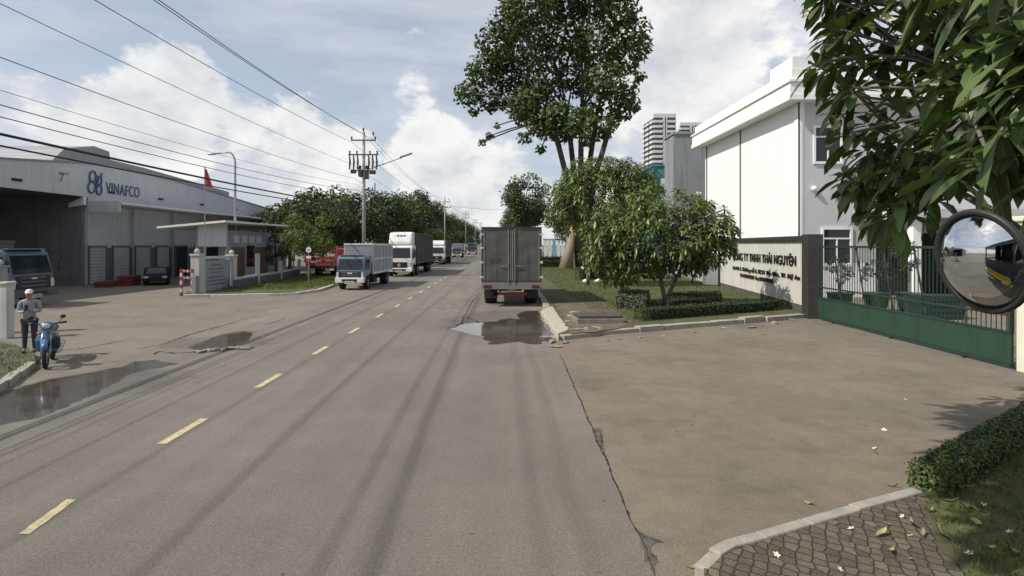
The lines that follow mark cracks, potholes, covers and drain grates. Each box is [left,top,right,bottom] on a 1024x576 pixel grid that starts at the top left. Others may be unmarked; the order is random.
pothole [188,330,255,350]
manhole cover [571,312,625,324]
